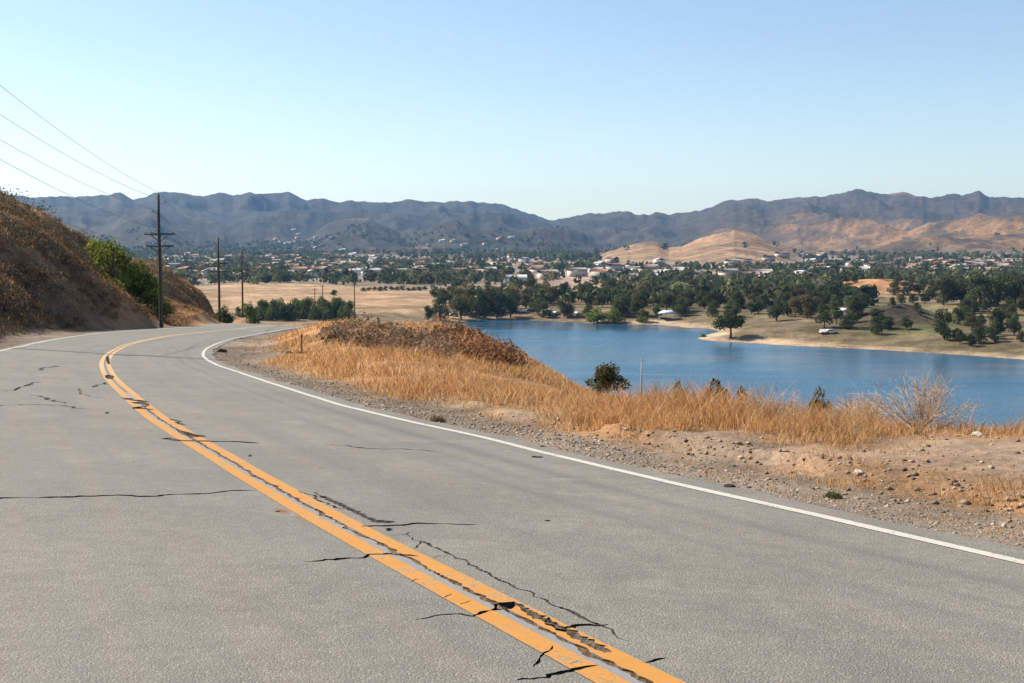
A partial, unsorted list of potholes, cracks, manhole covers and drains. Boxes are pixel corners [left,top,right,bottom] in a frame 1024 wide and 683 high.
crack [0,490,254,499]
crack [309,523,631,680]
crack [0,366,255,443]
crack [299,491,343,510]
